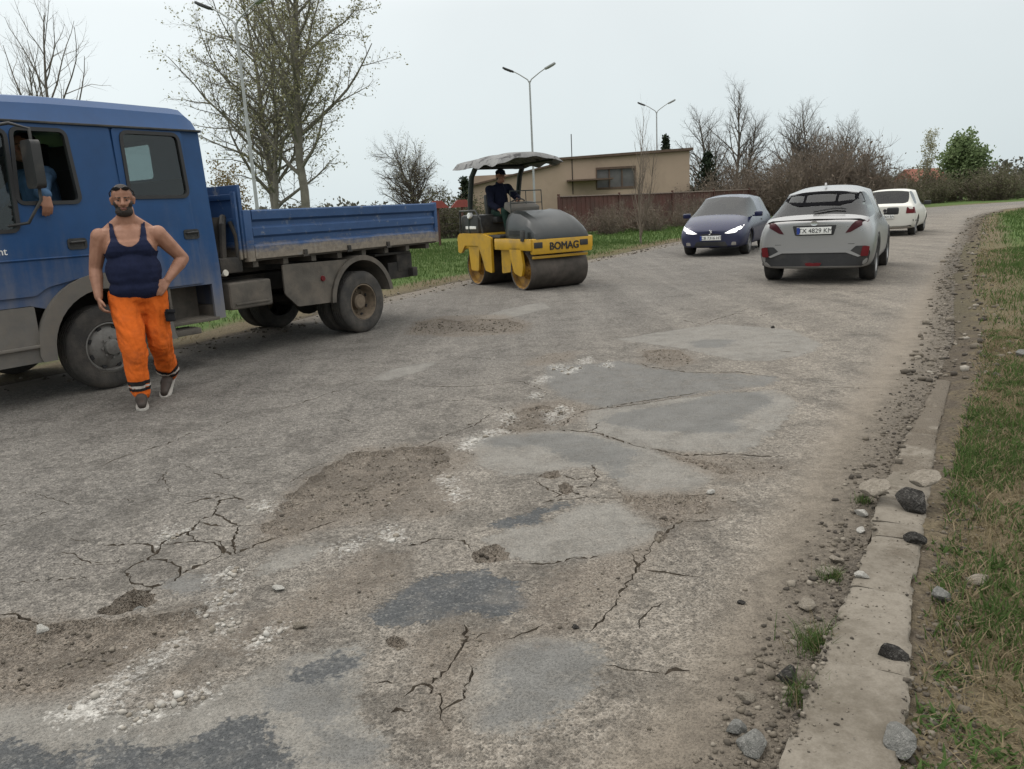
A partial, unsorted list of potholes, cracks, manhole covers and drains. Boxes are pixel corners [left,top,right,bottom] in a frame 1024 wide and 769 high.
pothole [260,446,451,539]
pothole [409,318,526,334]
pothole [642,349,693,365]
crack [13,463,334,593]
crack [377,624,486,721]
pothole [92,587,158,615]
pothole [471,544,510,563]
crack [590,519,716,632]
crack [562,393,784,457]
